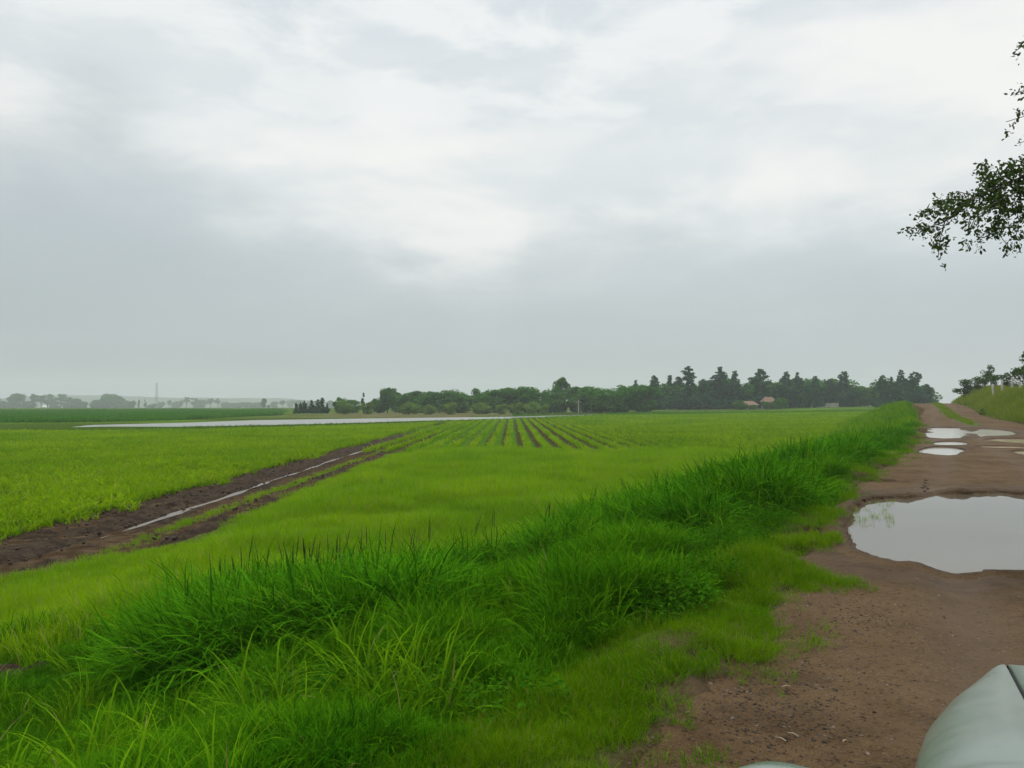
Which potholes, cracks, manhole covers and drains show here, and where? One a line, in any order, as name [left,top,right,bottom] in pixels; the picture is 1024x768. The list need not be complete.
pothole [916,446,967,456]
pothole [820,487,1024,580]
pothole [917,426,1021,439]
